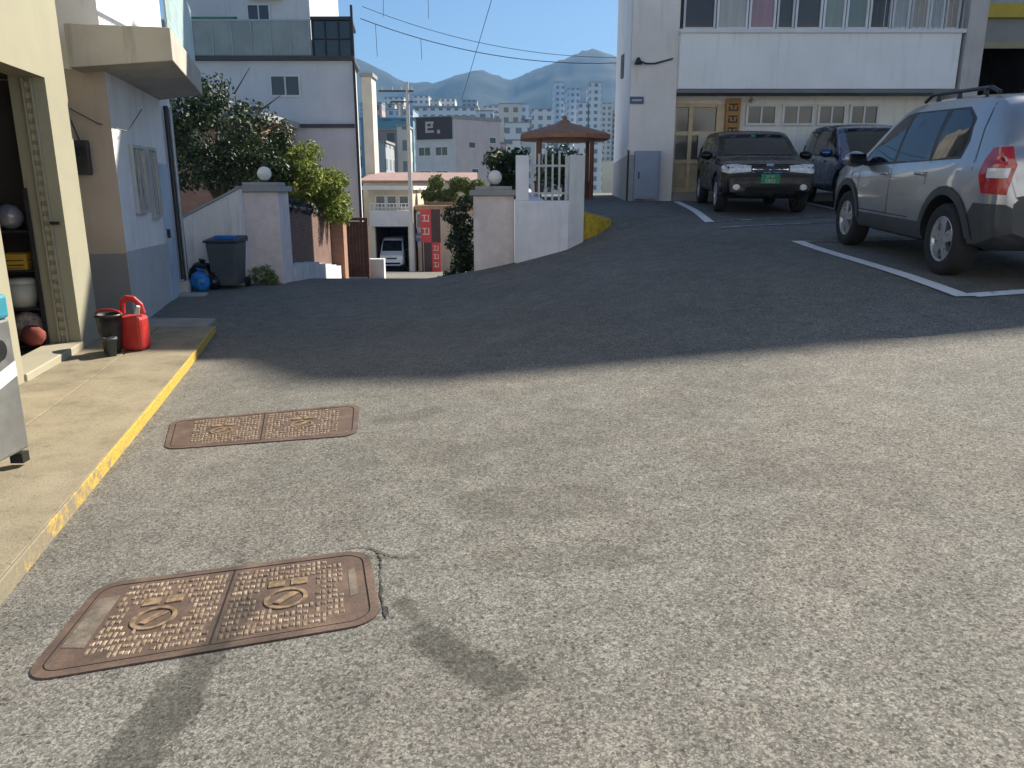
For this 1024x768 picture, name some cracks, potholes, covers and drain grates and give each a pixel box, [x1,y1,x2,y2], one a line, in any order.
manhole cover [165,405,359,449]
crack [350,546,400,609]
manhole cover [30,551,379,679]
